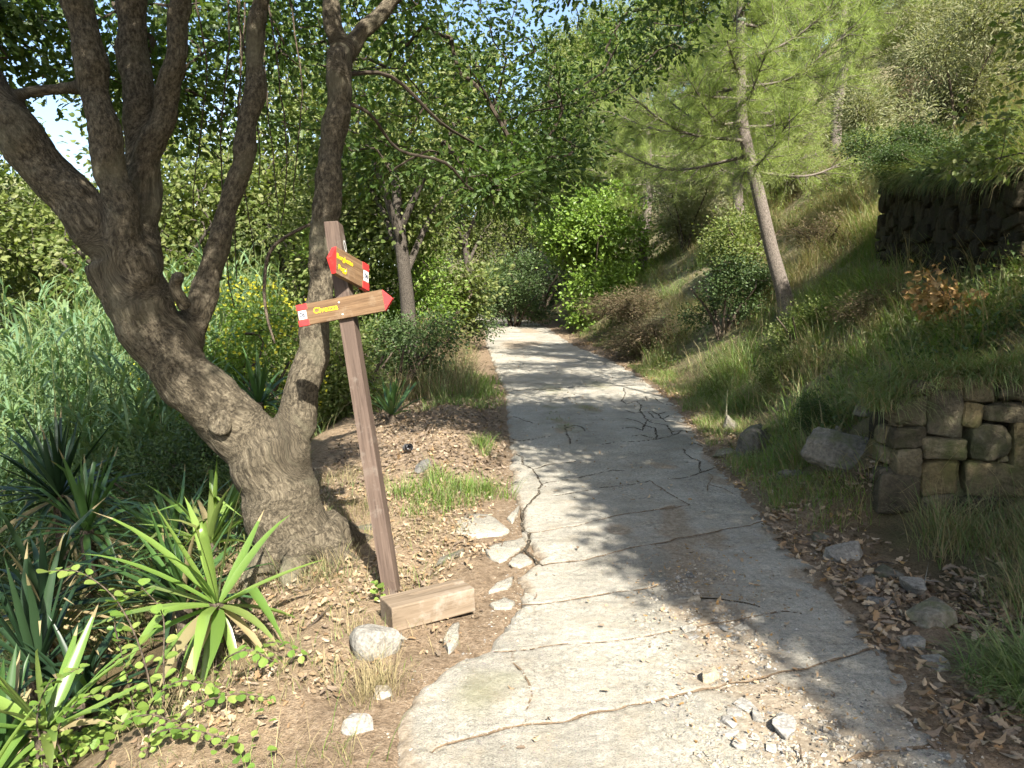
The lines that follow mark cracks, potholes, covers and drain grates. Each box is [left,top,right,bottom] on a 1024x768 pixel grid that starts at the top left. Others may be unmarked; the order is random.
crack [432,388,932,763]
